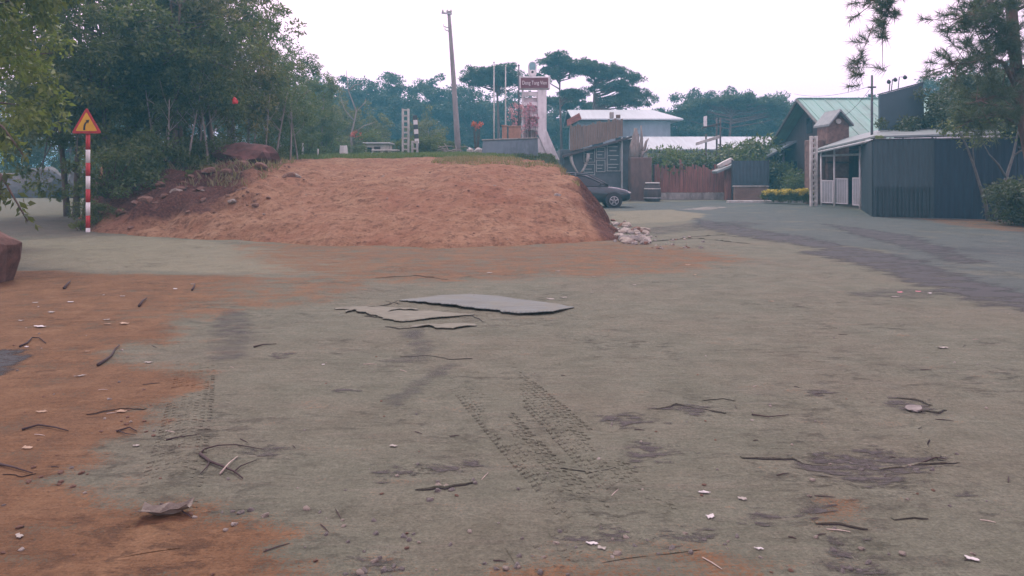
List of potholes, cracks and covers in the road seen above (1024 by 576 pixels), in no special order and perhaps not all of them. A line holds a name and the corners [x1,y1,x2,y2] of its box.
crack [337,300,406,329]
crack [657,398,734,413]
